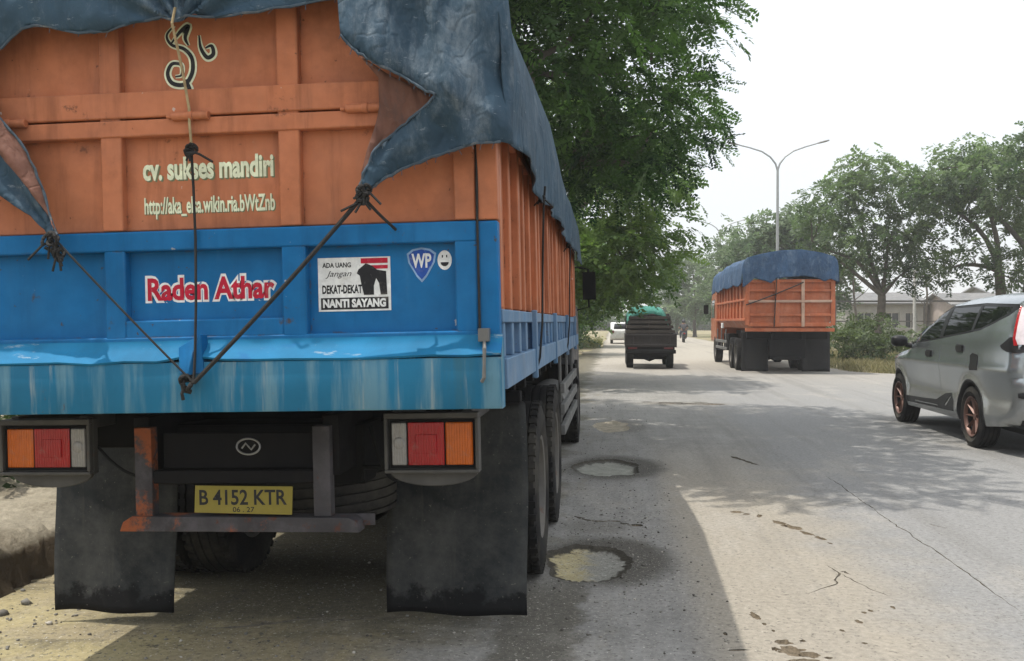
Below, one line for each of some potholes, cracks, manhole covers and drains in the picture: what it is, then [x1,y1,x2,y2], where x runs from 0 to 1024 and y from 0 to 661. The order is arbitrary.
pothole [546,544,634,583]
pothole [570,459,640,476]
crack [811,566,890,597]
crack [829,478,1017,609]
pothole [592,421,630,433]
